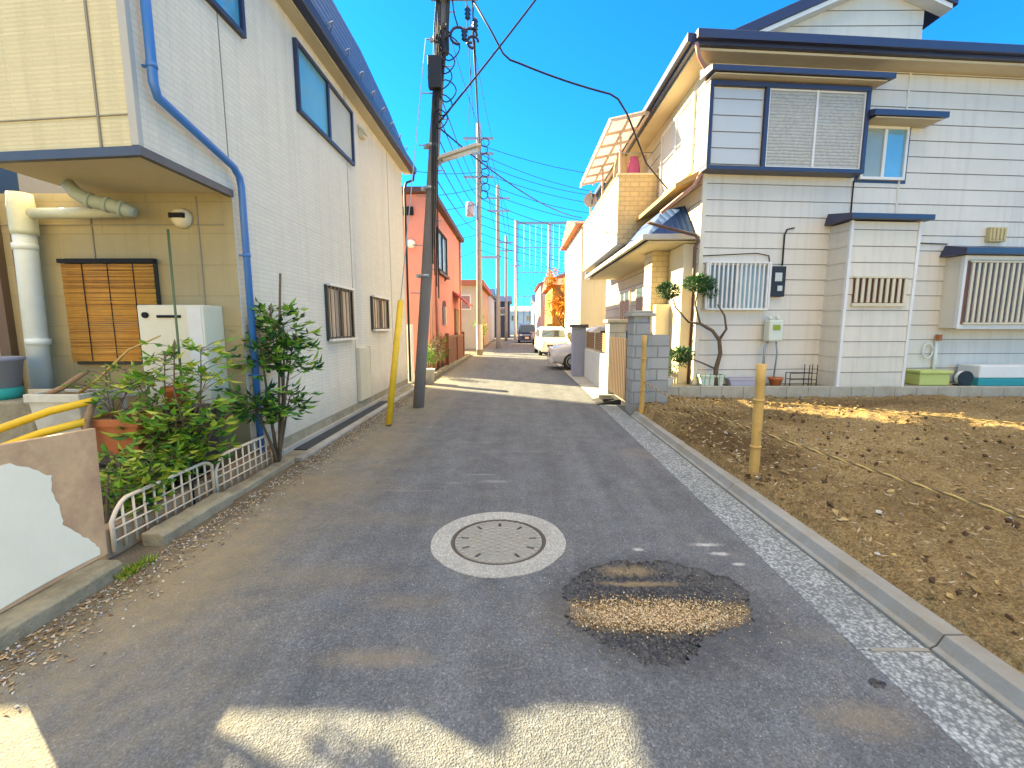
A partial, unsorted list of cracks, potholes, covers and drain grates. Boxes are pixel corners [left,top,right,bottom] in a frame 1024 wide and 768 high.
pothole [867,678,887,689]
manhole cover [431,512,566,579]
pothole [499,560,804,667]
